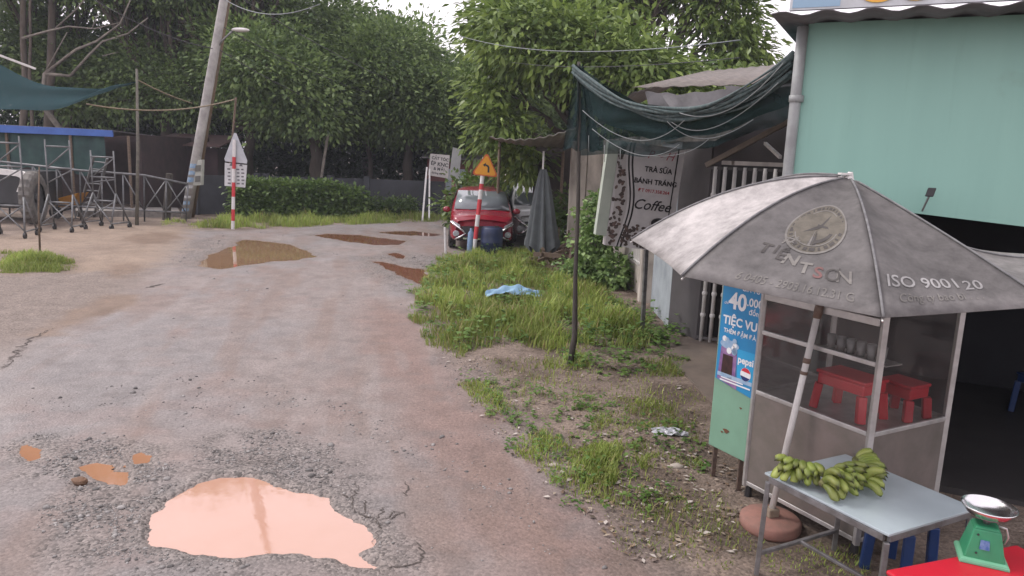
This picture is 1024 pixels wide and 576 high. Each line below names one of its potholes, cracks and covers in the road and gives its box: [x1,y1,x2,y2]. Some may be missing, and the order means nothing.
pothole [357,258,443,287]
pothole [177,237,331,271]
crack [389,543,425,568]
crack [1,328,53,369]
pothole [106,443,176,472]
pothole [367,229,448,237]
pothole [301,232,418,246]
pothole [55,454,151,494]
pothole [120,466,409,576]
crack [342,483,410,538]
